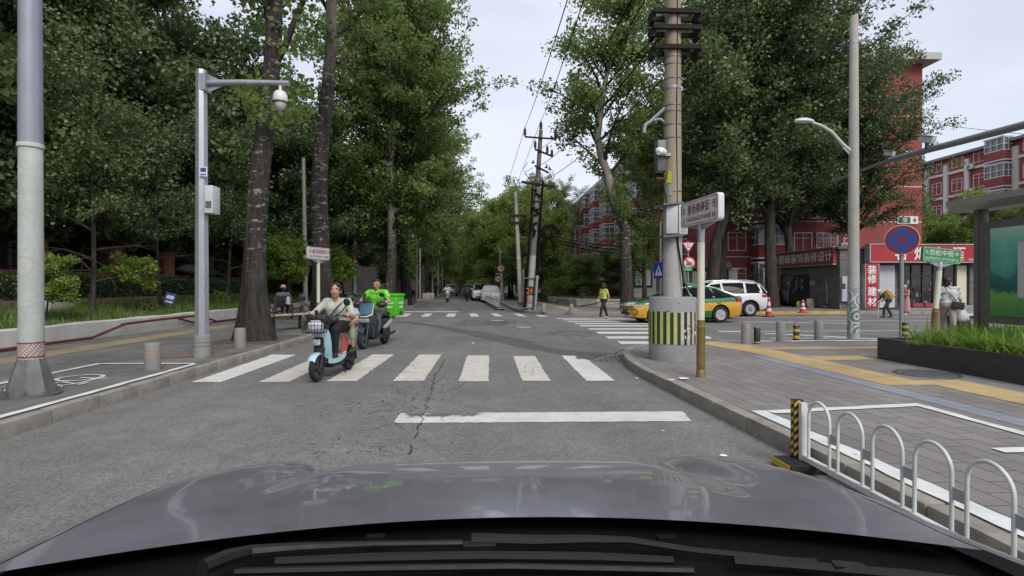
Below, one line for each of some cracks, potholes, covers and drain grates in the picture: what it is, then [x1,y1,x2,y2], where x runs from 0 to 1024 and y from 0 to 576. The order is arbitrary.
crack [261,337,467,455]
manhole cover [892,369,963,379]
